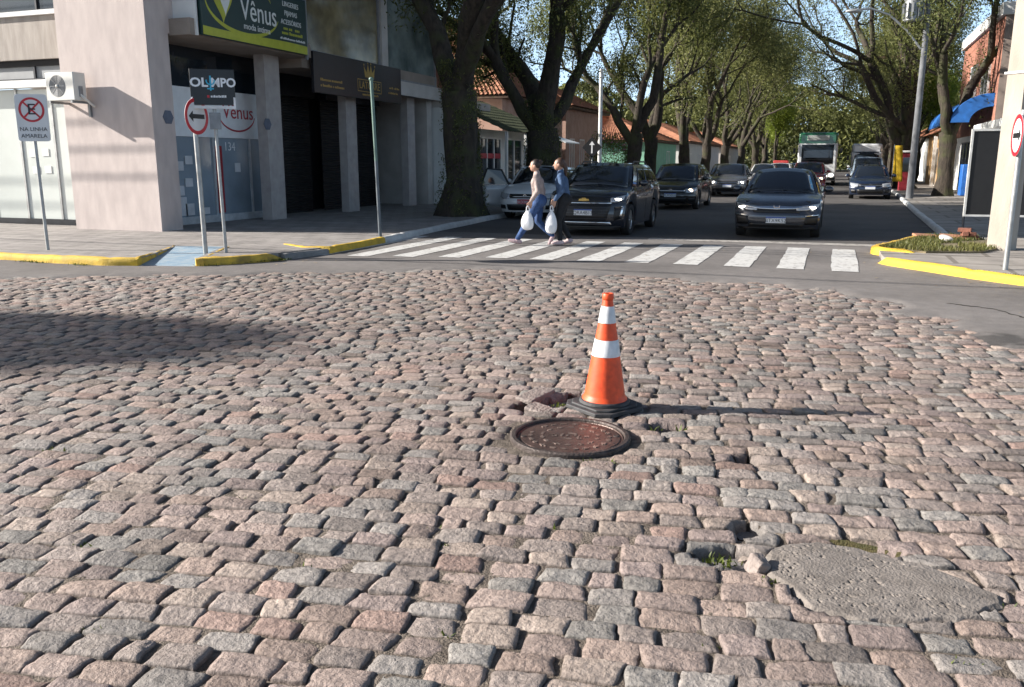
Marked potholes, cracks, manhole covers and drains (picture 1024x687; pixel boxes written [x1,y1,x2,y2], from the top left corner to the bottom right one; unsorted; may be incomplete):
manhole cover [510,417,631,459]
crack [950,303,1024,318]
